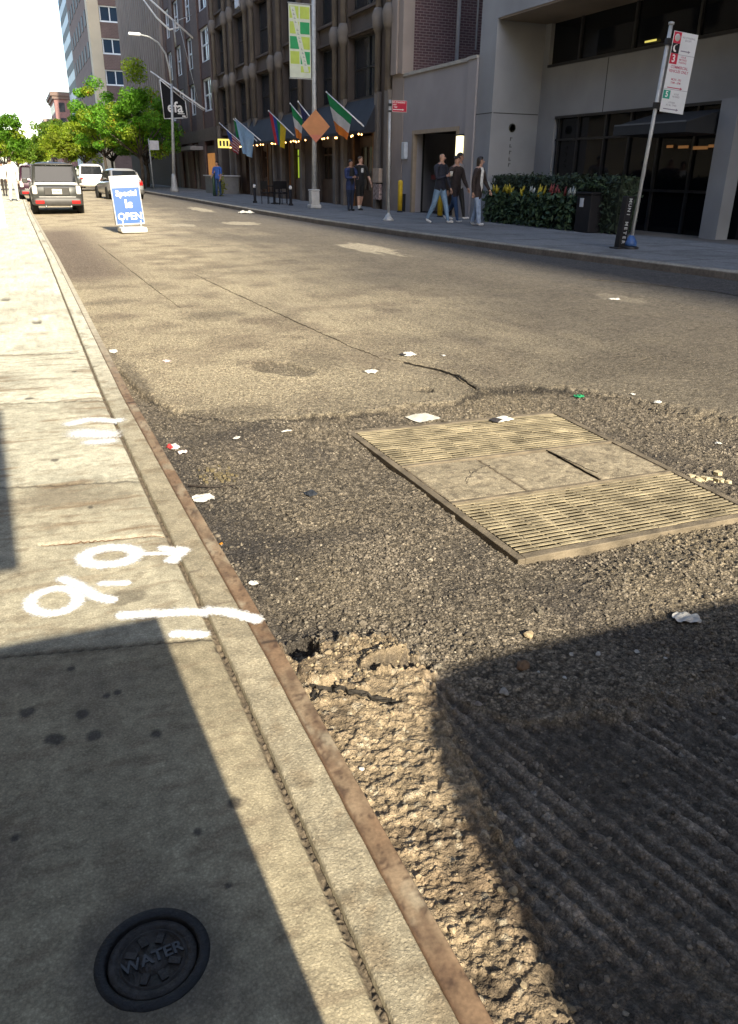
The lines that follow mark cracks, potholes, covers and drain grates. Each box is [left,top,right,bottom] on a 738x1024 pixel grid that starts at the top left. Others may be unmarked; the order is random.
pothole [281,636,320,662]
pothole [362,646,433,671]
manhole cover [93,908,210,1013]
drain grate [349,411,738,565]
crack [195,274,477,390]
